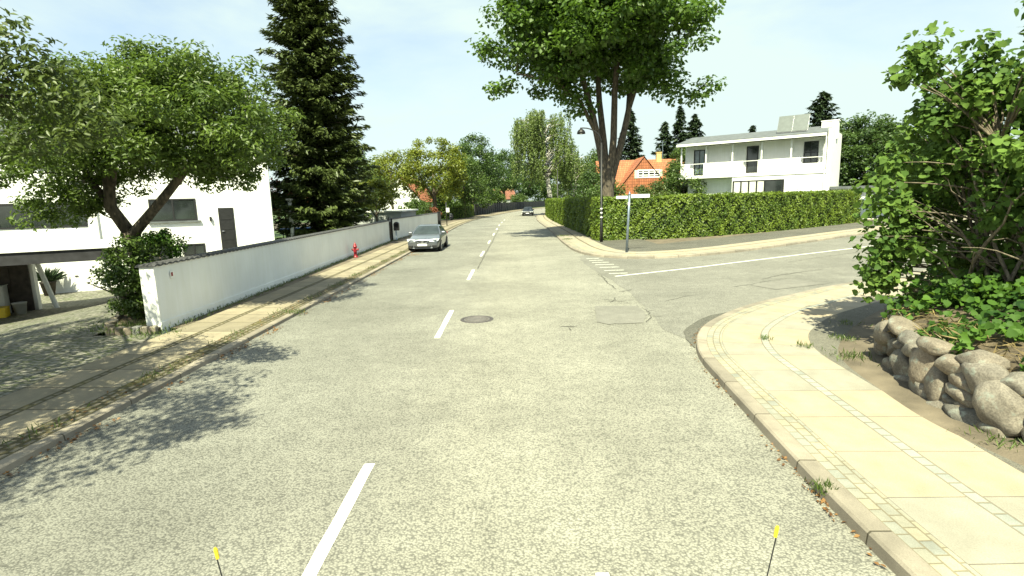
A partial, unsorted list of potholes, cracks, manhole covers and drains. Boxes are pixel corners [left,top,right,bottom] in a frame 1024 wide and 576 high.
manhole cover [460,315,493,323]
